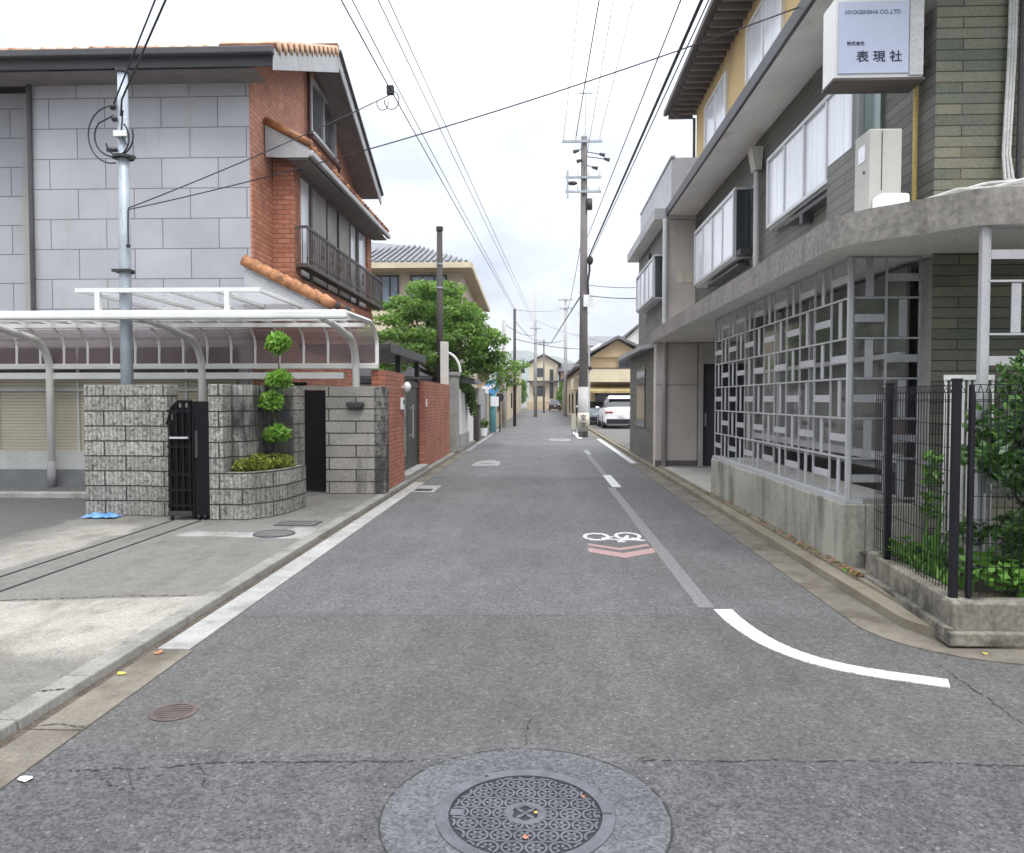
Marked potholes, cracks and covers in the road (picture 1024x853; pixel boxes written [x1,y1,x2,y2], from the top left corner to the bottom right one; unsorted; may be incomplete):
crack [940,665,1024,724]
manhole cover [378,748,674,853]
crack [636,755,1022,766]
manhole cover [148,702,198,722]
manhole cover [253,530,295,538]
crack [50,760,414,790]
